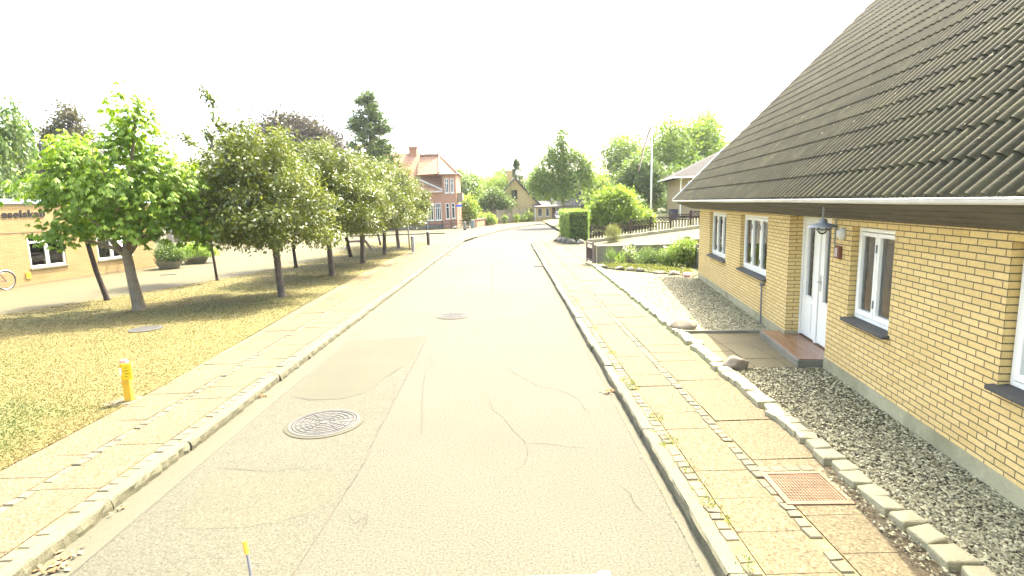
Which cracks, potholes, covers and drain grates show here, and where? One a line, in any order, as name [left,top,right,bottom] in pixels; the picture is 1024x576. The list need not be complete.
manhole cover [128,325,163,333]
manhole cover [284,409,364,439]
